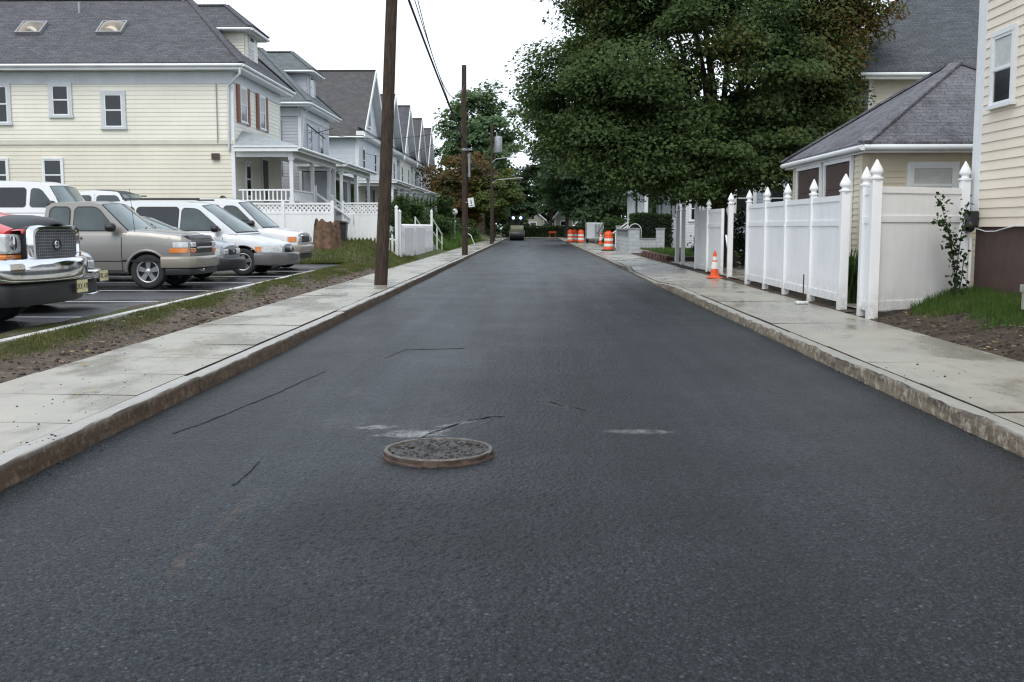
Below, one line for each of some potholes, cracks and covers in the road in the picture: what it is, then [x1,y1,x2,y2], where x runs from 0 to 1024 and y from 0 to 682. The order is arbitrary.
crack [420,416,492,438]
manhole cover [382,437,494,468]
crack [231,461,260,485]
